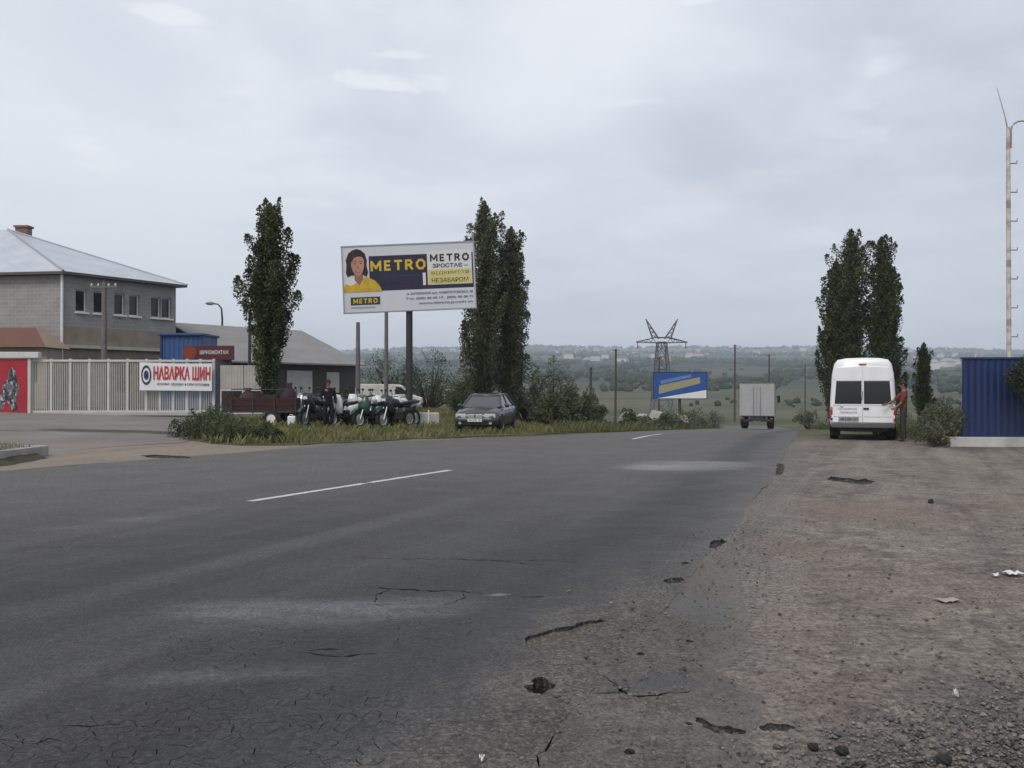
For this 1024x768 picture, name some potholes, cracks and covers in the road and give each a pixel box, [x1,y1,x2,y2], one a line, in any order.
pothole [695,717,746,735]
crack [0,685,409,768]
crack [167,626,377,671]
pothole [524,677,556,695]
crack [588,676,691,697]
pothole [827,476,875,485]
crack [364,586,543,642]
crack [507,732,563,766]
pothole [759,723,795,732]
